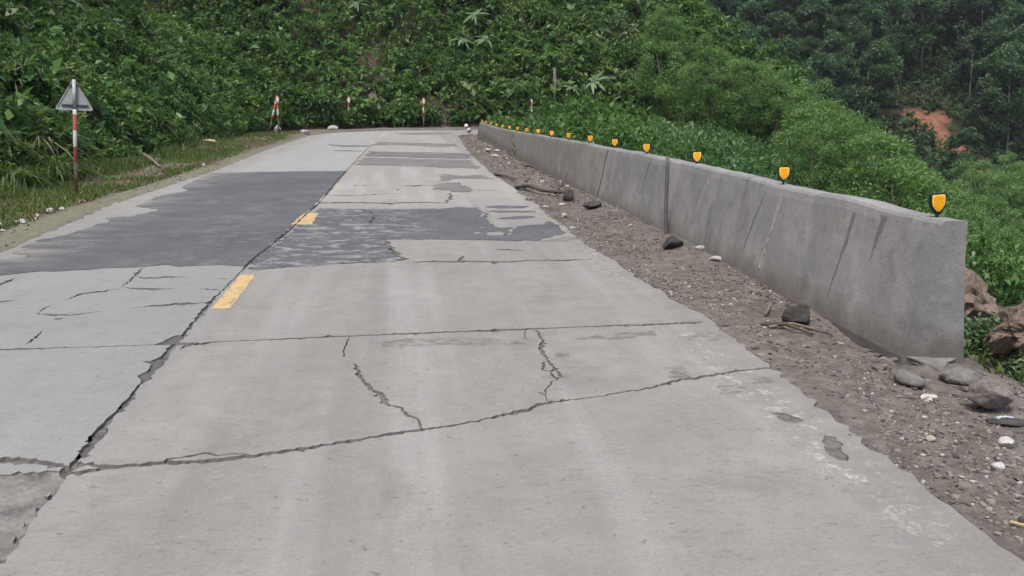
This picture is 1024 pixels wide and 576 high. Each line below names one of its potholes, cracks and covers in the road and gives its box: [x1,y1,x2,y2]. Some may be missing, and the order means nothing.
pothole [772,413,803,424]
crack [0,151,769,564]
pothole [821,435,849,461]
